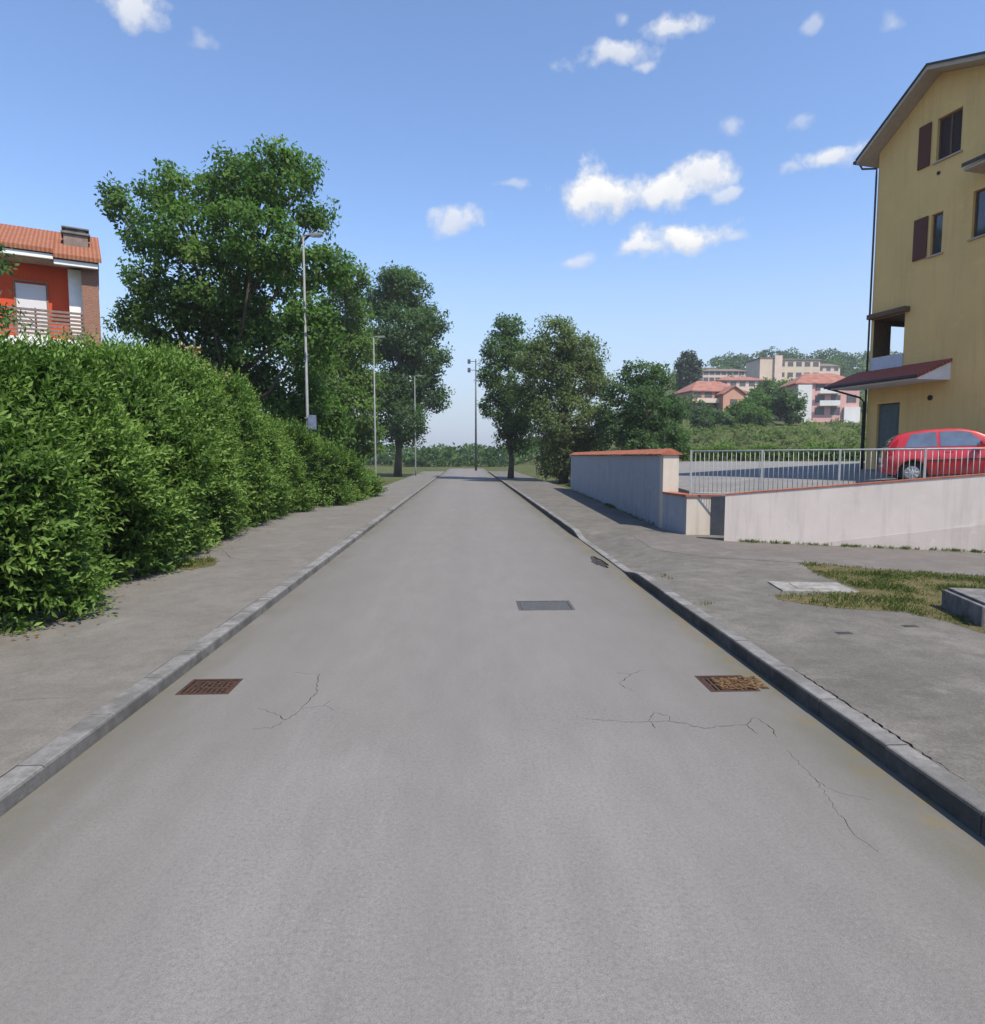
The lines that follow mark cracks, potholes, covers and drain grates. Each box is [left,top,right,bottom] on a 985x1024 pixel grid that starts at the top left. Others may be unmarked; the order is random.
pothole [590,556,609,568]
crack [586,713,878,852]
manhole cover [516,600,575,610]
drain grate [695,675,768,692]
crack [258,672,328,729]
drain grate [175,679,243,695]
